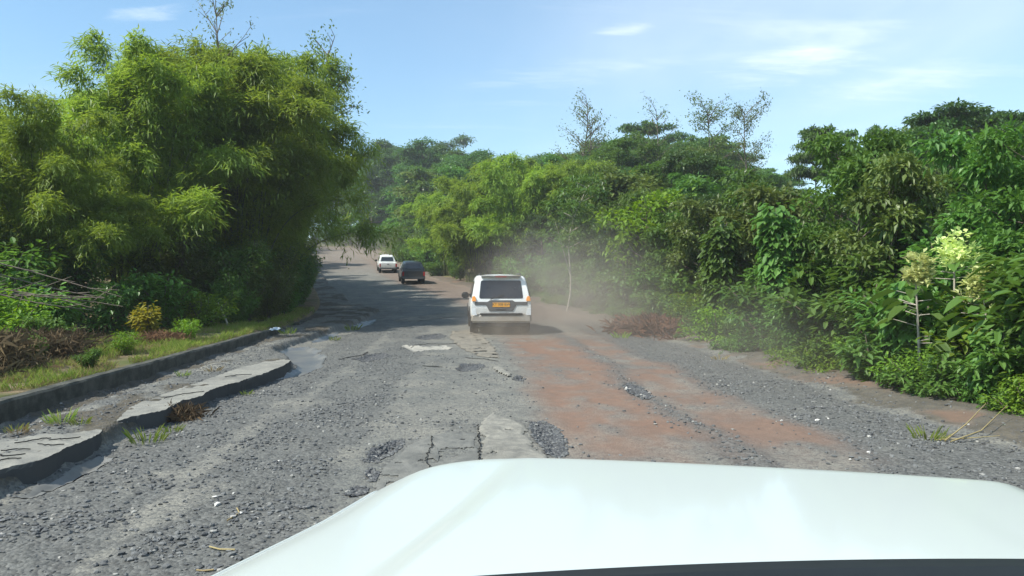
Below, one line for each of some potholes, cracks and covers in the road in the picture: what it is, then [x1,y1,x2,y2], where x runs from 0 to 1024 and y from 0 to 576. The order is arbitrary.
pothole [276,346,327,380]
pothole [455,363,484,372]
pothole [622,383,651,399]
pothole [529,420,569,457]
pothole [364,440,403,463]
